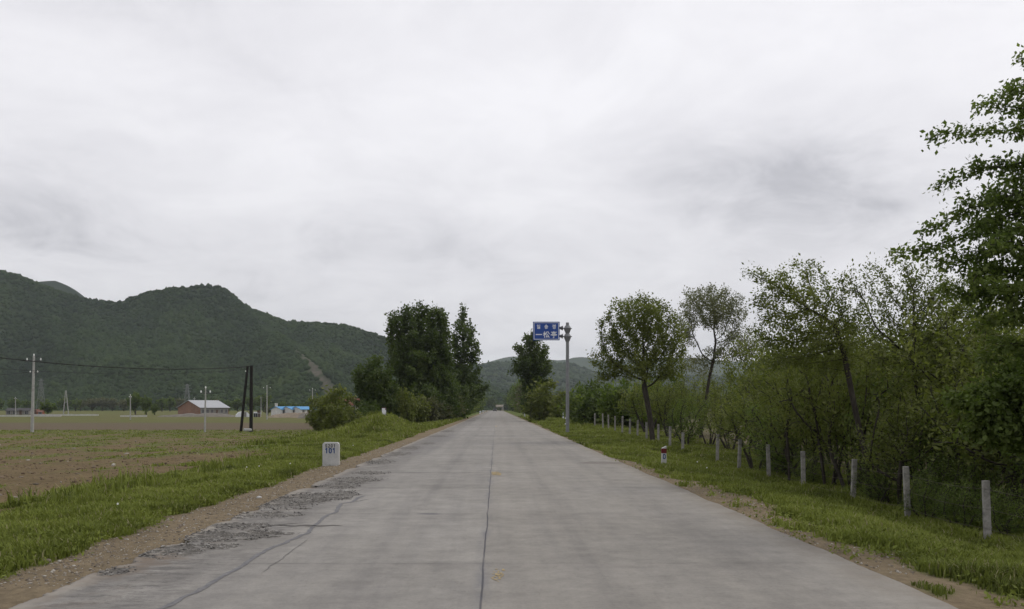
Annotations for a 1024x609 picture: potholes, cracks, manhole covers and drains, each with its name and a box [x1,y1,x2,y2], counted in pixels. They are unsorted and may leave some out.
pothole [261,492,341,510]
pothole [134,544,224,562]
crack [263,523,343,572]
pothole [183,527,295,543]
pothole [310,490,361,503]
pothole [97,566,136,576]
